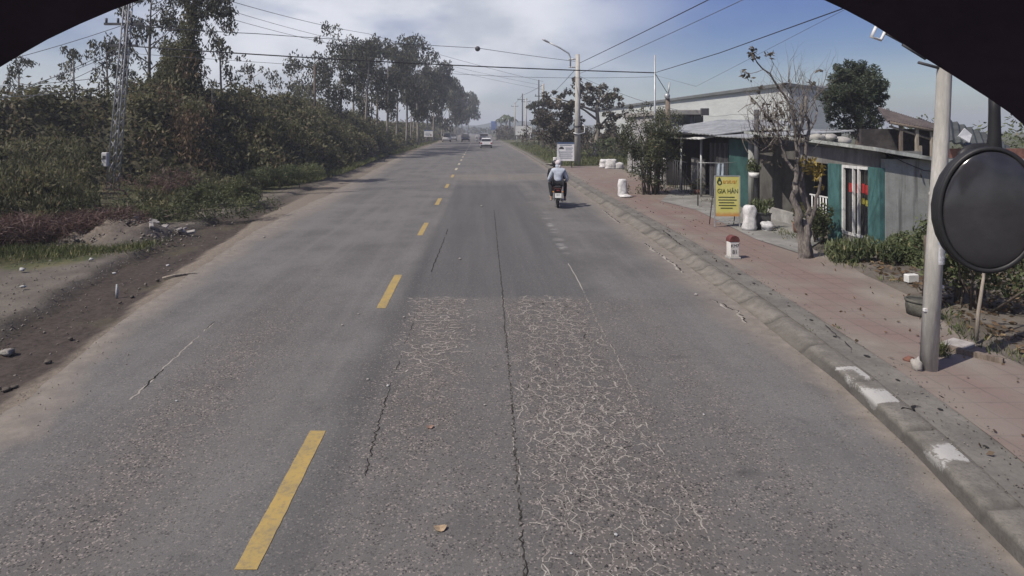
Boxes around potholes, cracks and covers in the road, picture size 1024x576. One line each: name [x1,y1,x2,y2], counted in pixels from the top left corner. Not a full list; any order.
crack [501,263,719,576]
crack [129,322,214,400]
crack [365,229,477,476]
crack [644,230,683,273]
